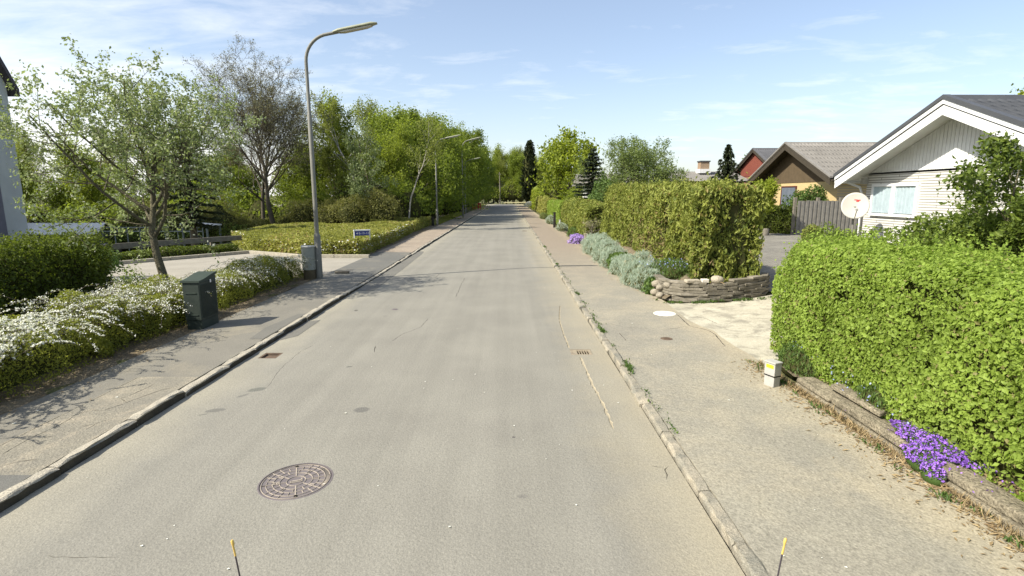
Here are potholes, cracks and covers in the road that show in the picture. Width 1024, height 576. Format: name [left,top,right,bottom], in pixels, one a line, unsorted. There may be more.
manhole cover [257,463,334,501]
crack [559,308,739,429]
